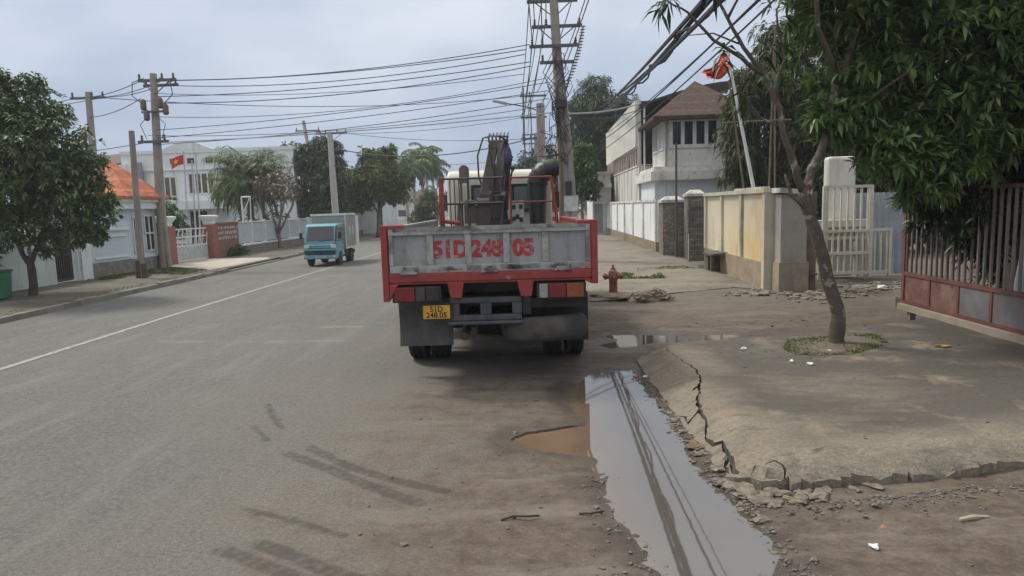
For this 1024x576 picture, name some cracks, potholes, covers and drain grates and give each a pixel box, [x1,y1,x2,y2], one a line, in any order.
crack [666,348,786,479]
pothole [511,425,578,441]
